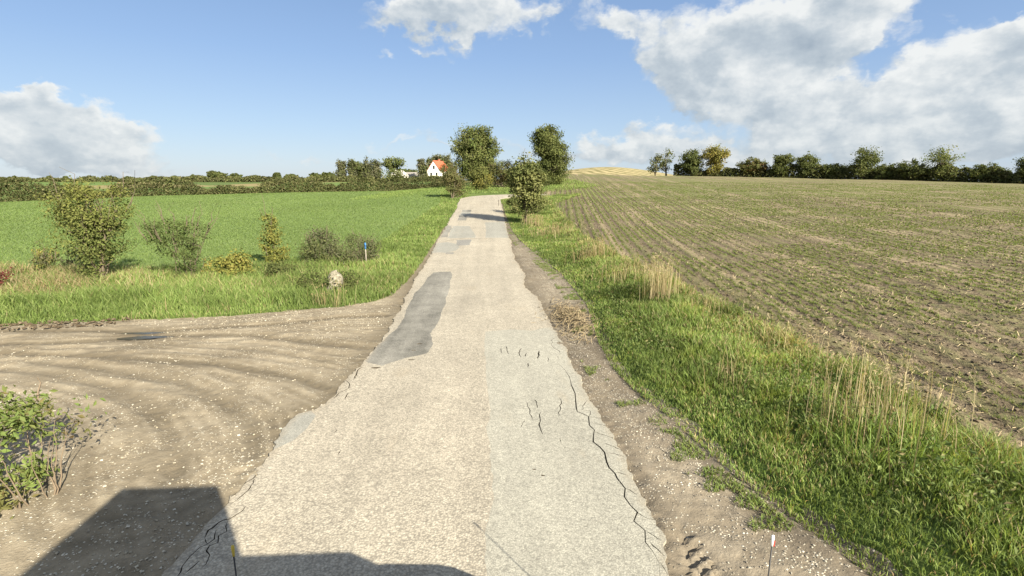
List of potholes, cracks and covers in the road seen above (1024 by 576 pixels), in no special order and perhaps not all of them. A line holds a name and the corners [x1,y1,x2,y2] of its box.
crack [501,338,668,575]
crack [178,473,258,575]
